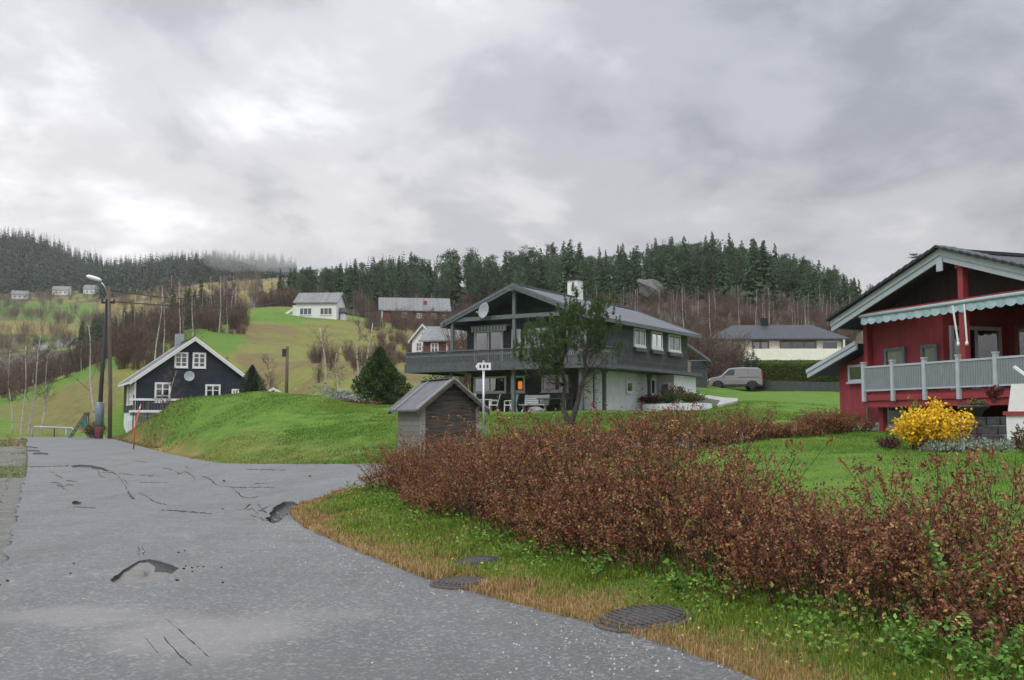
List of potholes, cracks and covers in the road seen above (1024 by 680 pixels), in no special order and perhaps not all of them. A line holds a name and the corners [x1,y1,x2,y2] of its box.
pothole [265,501,297,523]
crack [26,465,94,509]
manhole cover [449,555,499,569]
pothole [110,559,179,584]
crack [98,461,275,520]
manhole cover [429,576,491,590]
